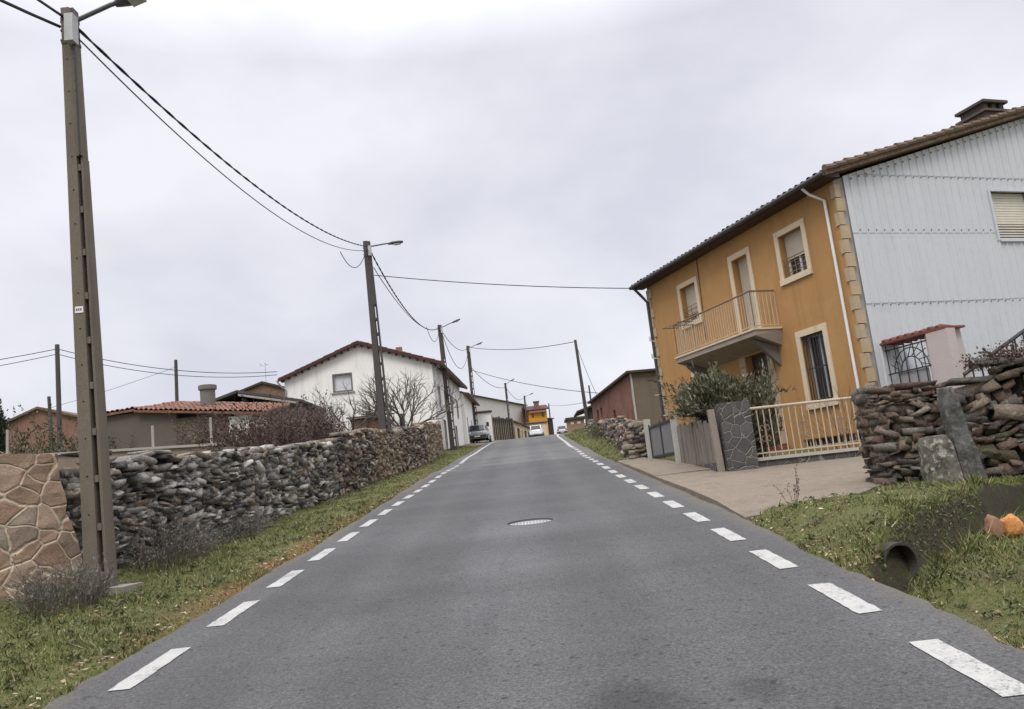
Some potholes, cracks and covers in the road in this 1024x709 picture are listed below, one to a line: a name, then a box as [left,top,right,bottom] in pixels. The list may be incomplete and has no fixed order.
manhole cover [505,517,556,526]
